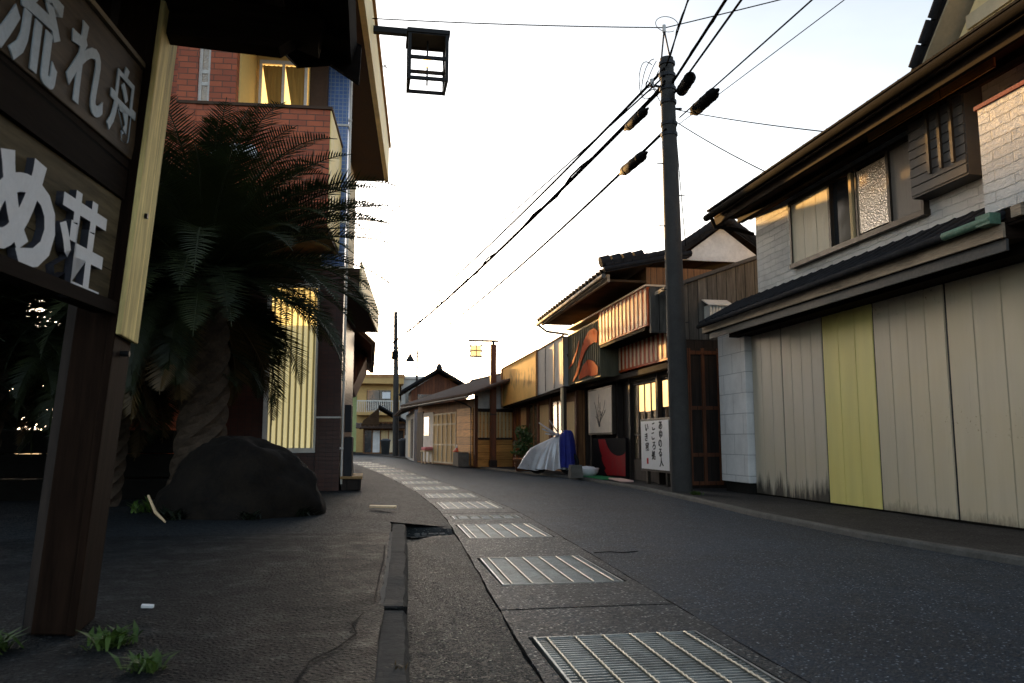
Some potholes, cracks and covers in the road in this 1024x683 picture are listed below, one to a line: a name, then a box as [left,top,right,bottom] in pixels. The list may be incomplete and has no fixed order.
drain grate [457,523,553,539]
drain grate [533,630,784,683]
crack [293,545,408,683]
drain grate [480,556,624,586]
drain grate [436,501,502,509]
